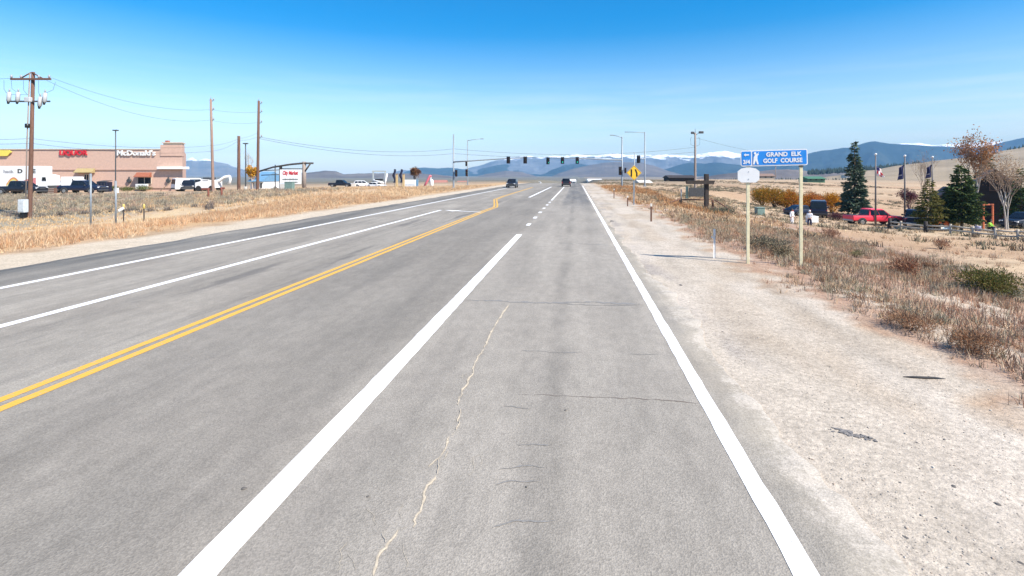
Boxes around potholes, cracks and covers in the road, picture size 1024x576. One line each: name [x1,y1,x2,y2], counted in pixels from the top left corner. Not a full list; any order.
crack [336,300,641,576]
